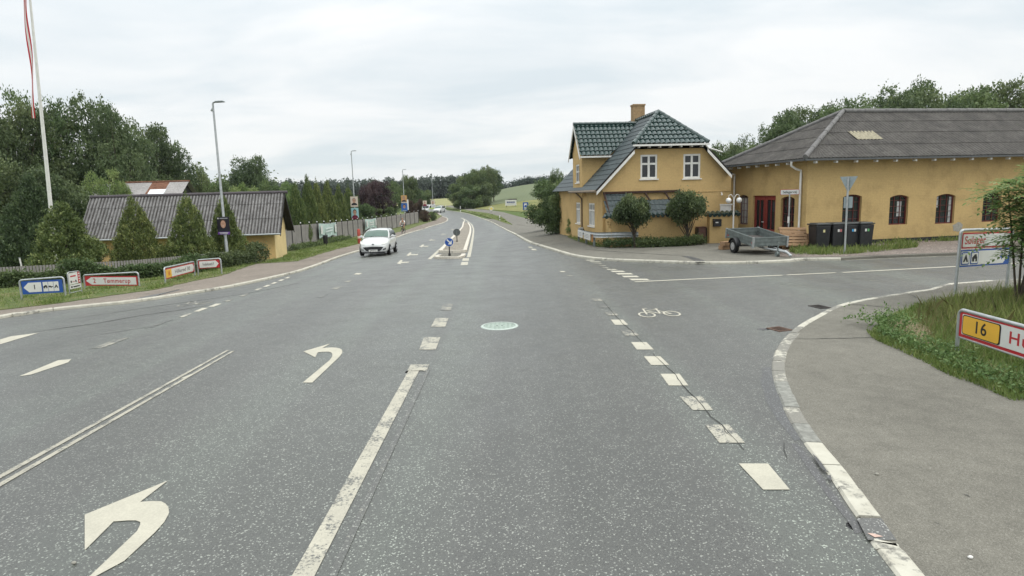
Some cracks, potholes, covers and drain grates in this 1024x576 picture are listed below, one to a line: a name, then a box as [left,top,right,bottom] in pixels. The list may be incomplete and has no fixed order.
manhole cover [481,322,518,330]
